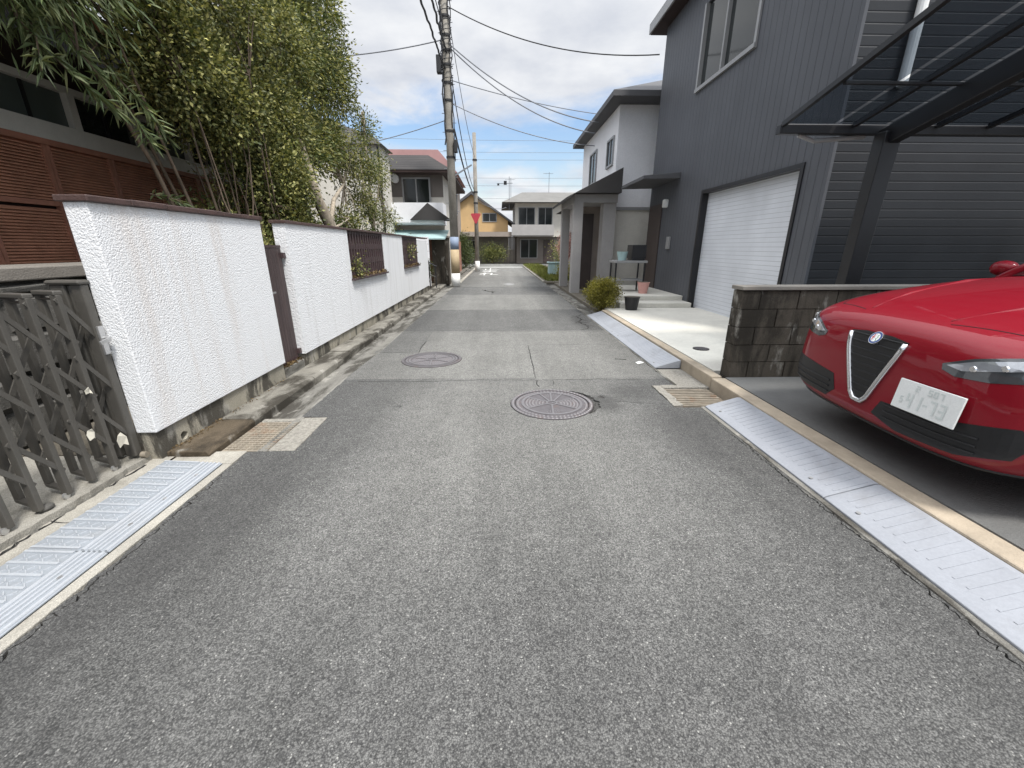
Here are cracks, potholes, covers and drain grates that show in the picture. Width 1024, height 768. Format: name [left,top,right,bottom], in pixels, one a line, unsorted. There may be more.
crack [565,314,626,360]
manhole cover [402,352,462,368]
manhole cover [511,389,593,420]
